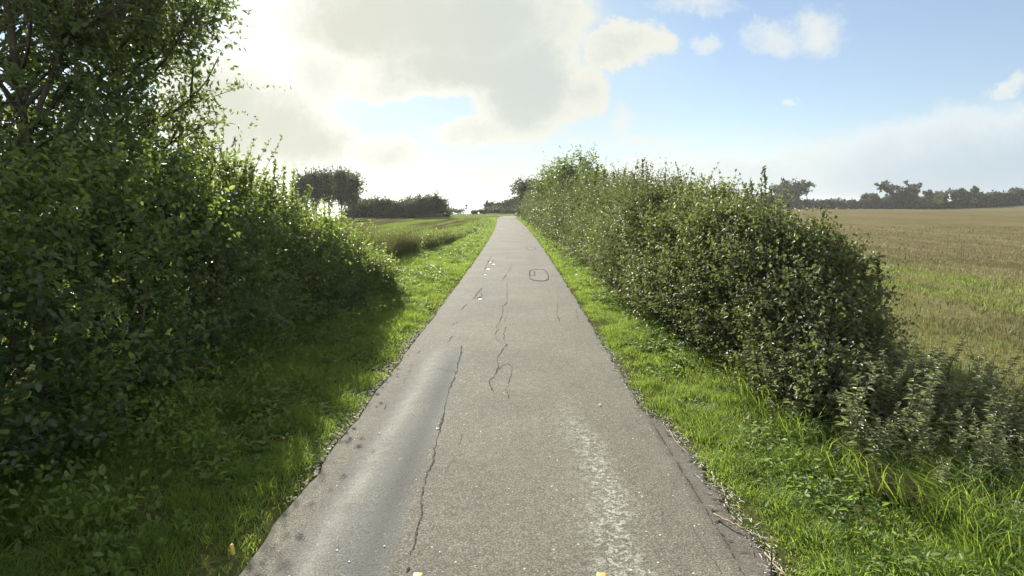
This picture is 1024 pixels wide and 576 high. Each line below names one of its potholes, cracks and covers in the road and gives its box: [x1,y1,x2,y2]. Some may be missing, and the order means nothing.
crack [665,429,757,572]
crack [403,288,482,572]
crack [486,256,516,406]
